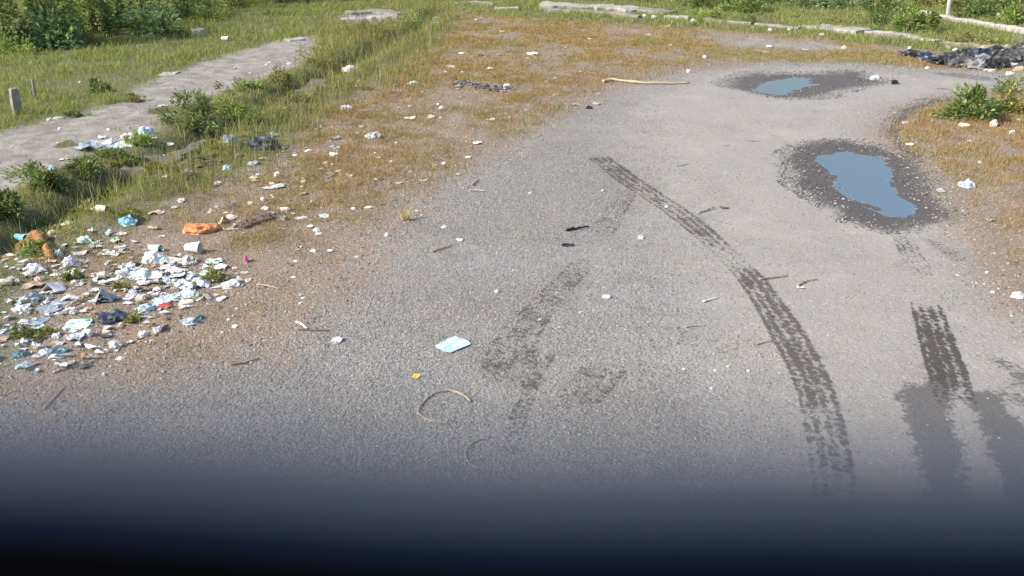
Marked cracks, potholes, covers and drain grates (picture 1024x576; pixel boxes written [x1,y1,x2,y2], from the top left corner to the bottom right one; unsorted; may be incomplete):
pothole [776,139,960,234]
pothole [714,69,891,99]
